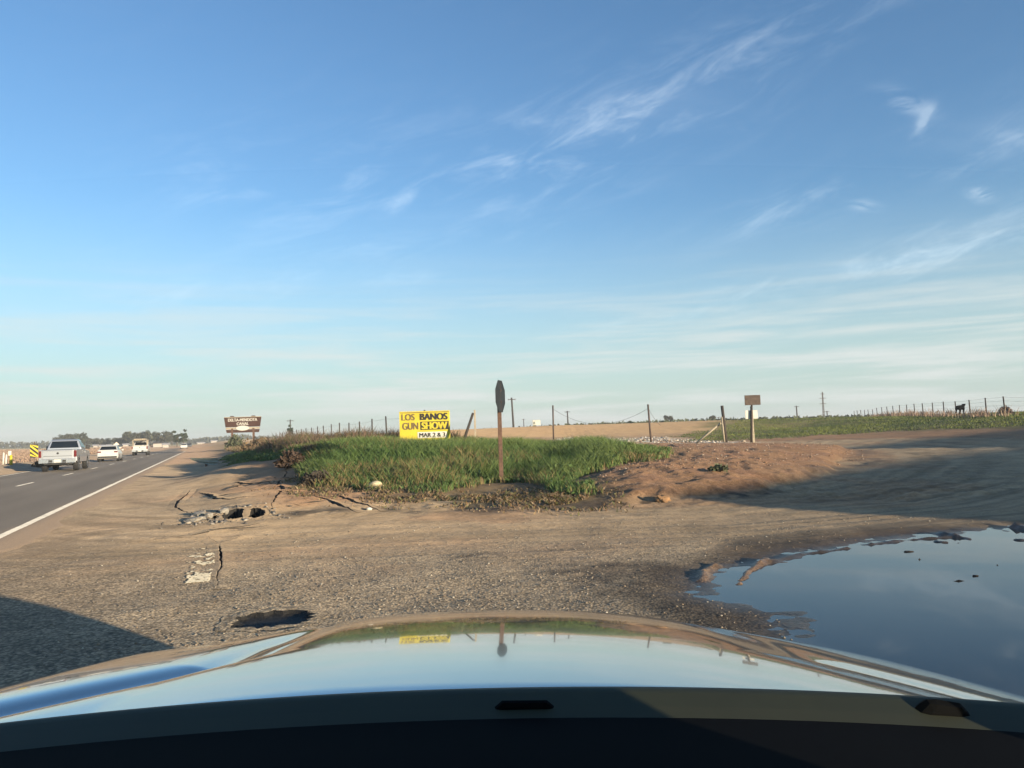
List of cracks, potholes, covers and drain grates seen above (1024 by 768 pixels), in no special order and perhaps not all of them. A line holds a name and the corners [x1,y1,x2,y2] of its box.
crack [150,468,389,591]
pothole [216,507,251,521]
pothole [214,606,330,633]
pothole [242,506,269,520]
